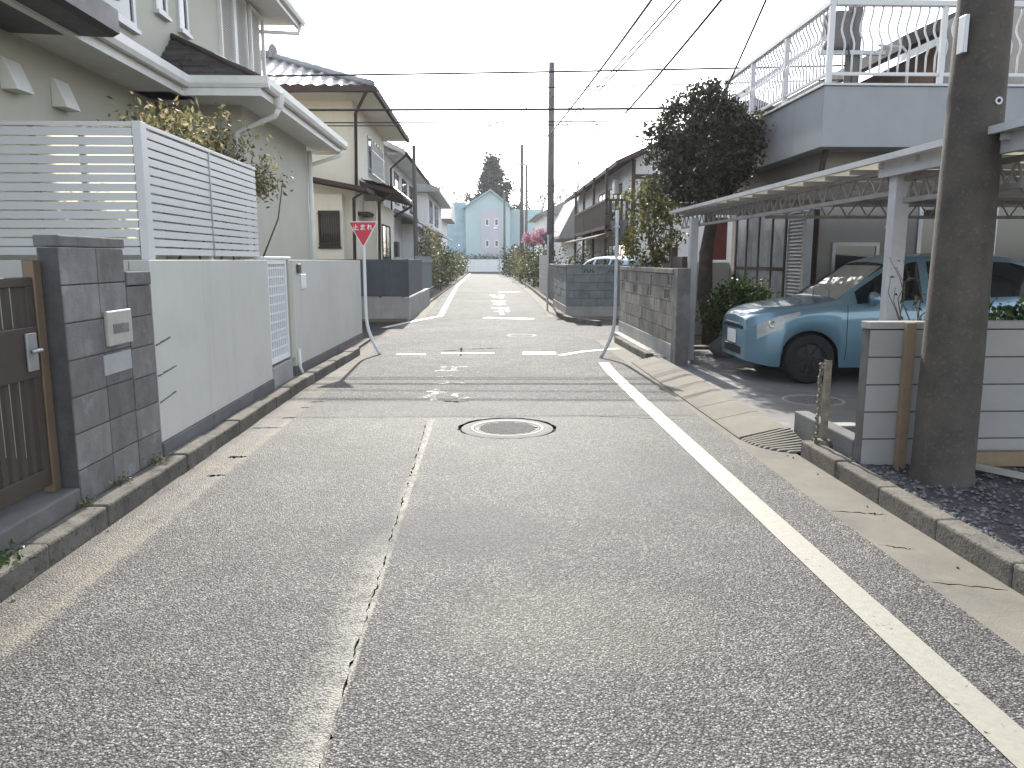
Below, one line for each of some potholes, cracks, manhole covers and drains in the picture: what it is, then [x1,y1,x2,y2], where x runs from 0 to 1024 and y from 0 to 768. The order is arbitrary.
manhole cover [781,395,846,406]
crack [928,581,1004,590]
crack [319,425,426,768]
manhole cover [458,418,556,439]
